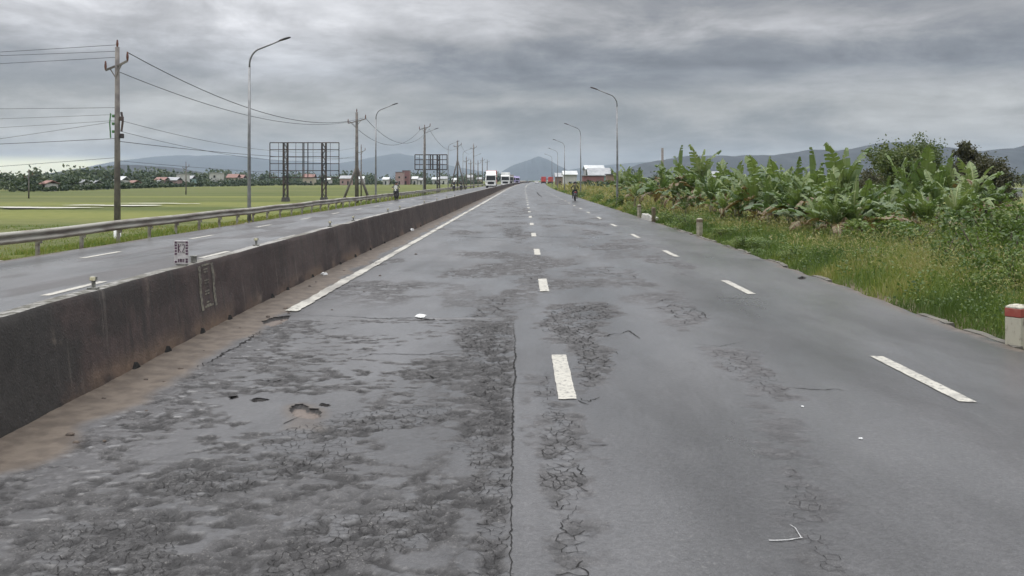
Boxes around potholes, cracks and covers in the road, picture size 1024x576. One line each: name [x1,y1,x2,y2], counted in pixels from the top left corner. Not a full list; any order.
crack [22,516,180,576]
crack [151,467,257,500]
crack [197,331,260,367]
pothole [289,404,322,419]
crack [534,376,589,576]
crack [541,303,640,405]
pothole [261,315,291,328]
crack [260,403,458,478]
crack [783,469,844,572]
crack [259,498,448,576]
crack [704,343,840,398]
